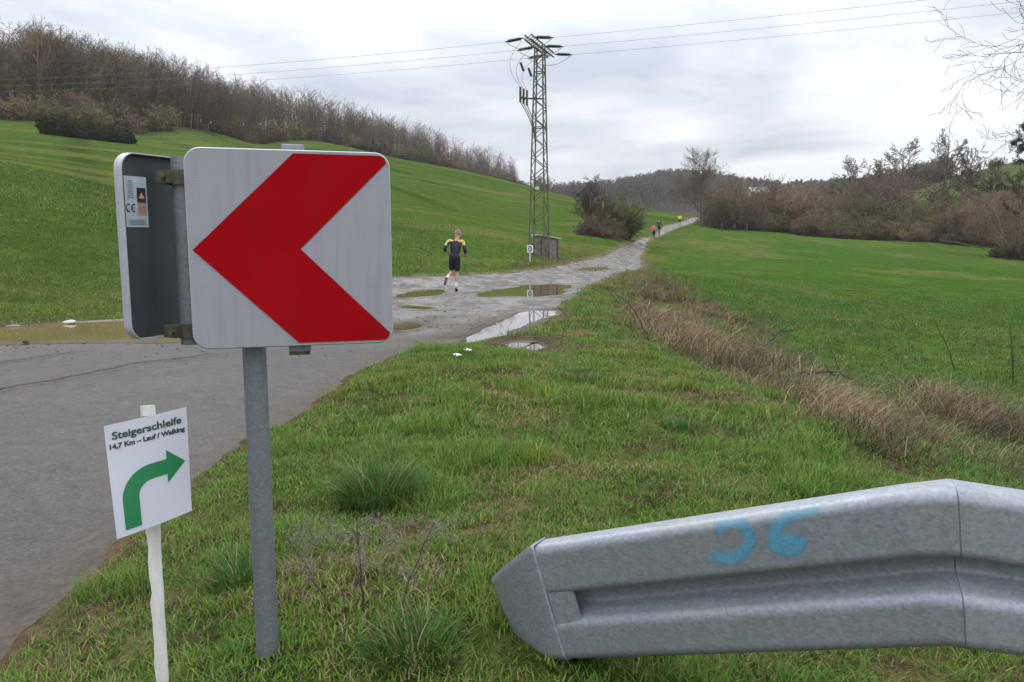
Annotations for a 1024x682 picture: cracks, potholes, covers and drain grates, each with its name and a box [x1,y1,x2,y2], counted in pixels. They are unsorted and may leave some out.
crack [0,351,221,392]
pothole [446,309,561,344]
